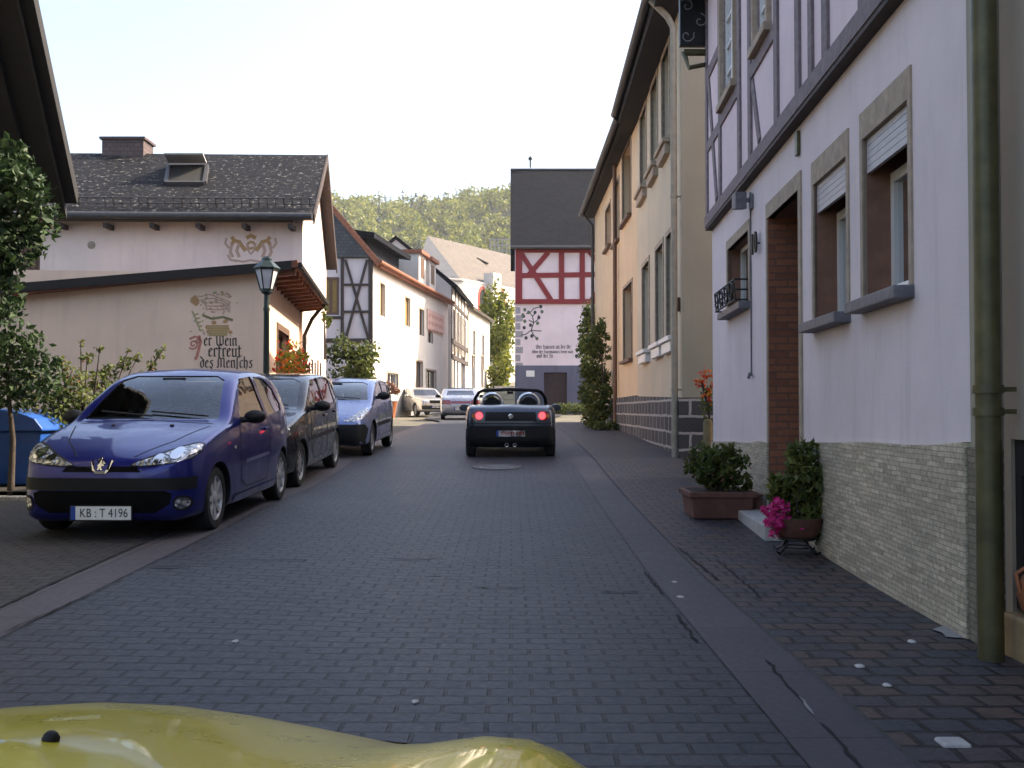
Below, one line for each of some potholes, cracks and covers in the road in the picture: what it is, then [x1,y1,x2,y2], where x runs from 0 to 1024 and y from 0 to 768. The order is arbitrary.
crack [765,659,801,699]
crack [820,722,863,768]
crack [604,547,762,598]
